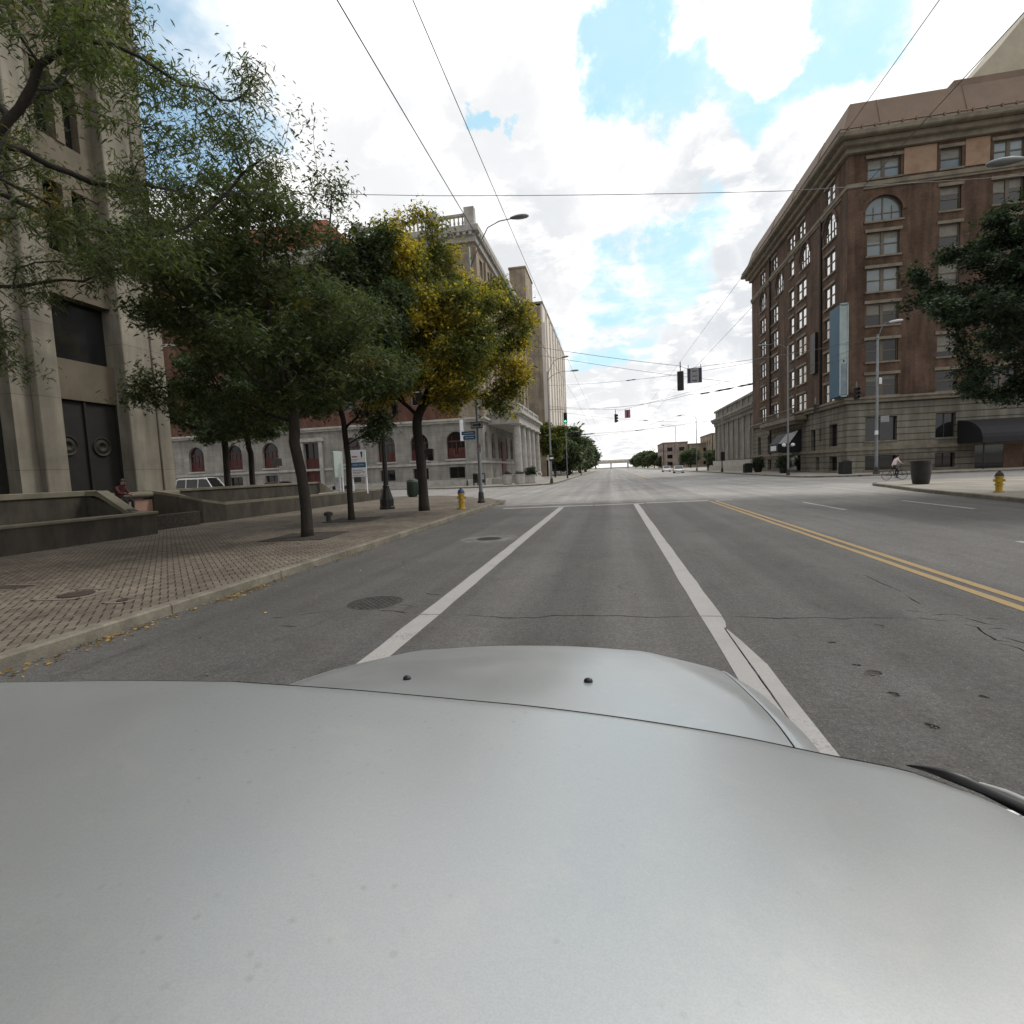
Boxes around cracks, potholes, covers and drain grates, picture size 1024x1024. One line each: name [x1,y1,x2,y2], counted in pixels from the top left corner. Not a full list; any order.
crack [867,576,1024,651]
manhole cover [347,596,403,610]
manhole cover [460,535,518,543]
